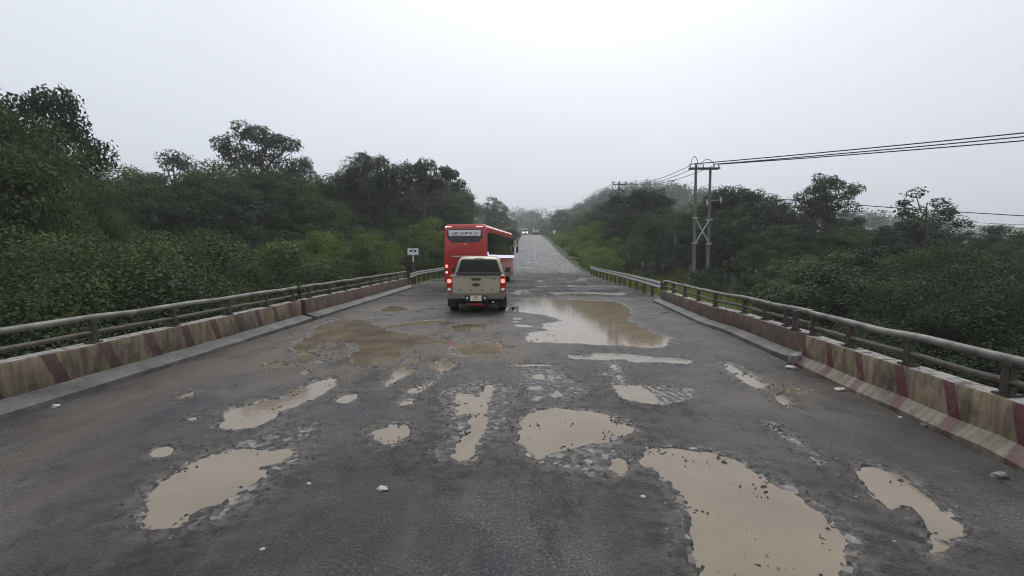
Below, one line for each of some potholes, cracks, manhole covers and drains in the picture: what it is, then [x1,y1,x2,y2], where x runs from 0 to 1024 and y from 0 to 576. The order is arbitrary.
pothole [136,423,319,531]
pothole [435,380,518,462]
pothole [382,368,417,387]
pothole [509,298,673,348]
pothole [515,406,639,478]
pothole [425,358,457,372]
pothole [610,383,696,405]
pothole [290,319,505,365]
pothole [567,353,693,364]
pothole [217,376,340,431]
pothole [636,445,862,576]
pothole [367,420,414,446]
